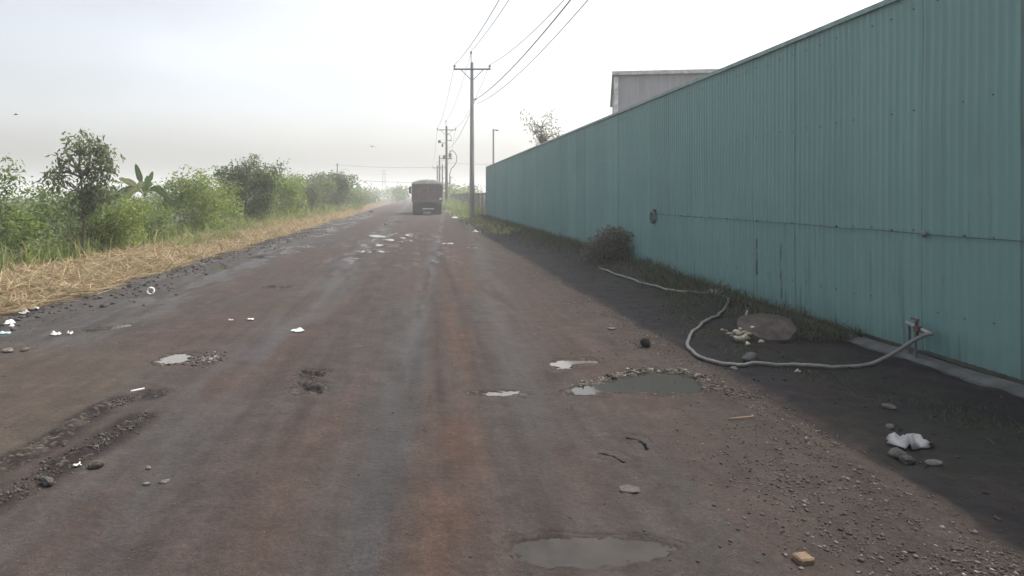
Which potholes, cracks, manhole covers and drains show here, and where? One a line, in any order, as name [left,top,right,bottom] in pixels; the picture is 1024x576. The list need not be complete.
crack [585,434,661,469]
pothole [464,389,537,399]
pothole [543,357,604,370]
pothole [147,352,202,367]
pothole [558,371,711,399]
pothole [501,532,687,573]
pothole [288,370,331,397]
